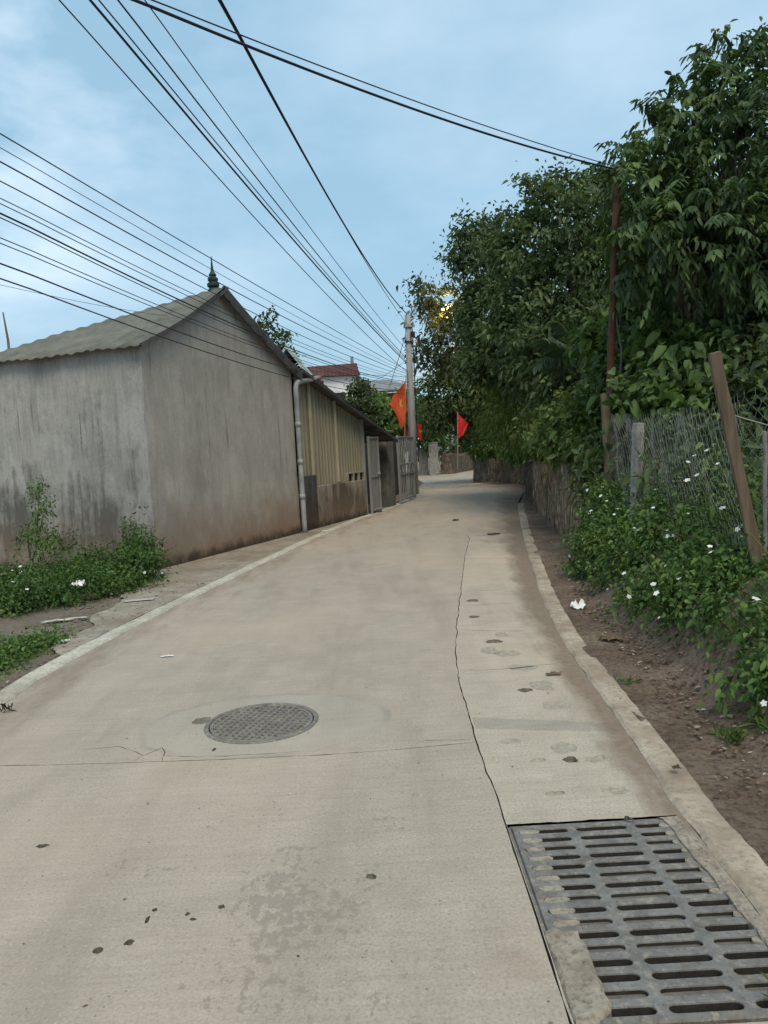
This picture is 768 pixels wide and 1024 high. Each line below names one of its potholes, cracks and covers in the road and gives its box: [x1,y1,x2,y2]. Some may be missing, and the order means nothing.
drain grate [508,816,768,1024]
manhole cover [204,703,319,755]
